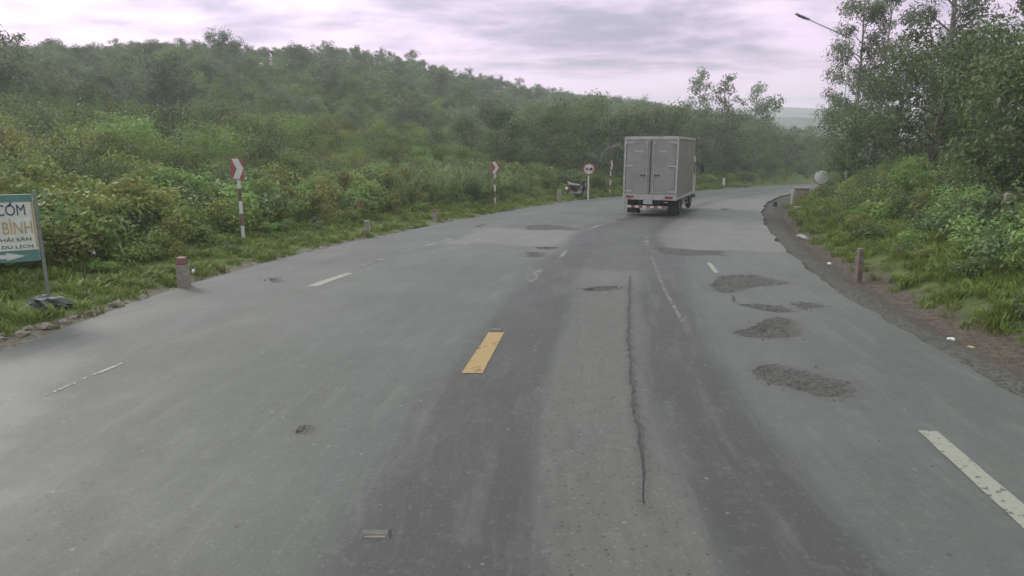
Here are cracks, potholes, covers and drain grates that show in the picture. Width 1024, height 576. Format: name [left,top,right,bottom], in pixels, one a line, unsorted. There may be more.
crack [626,277,647,504]
pothole [295,425,315,435]
